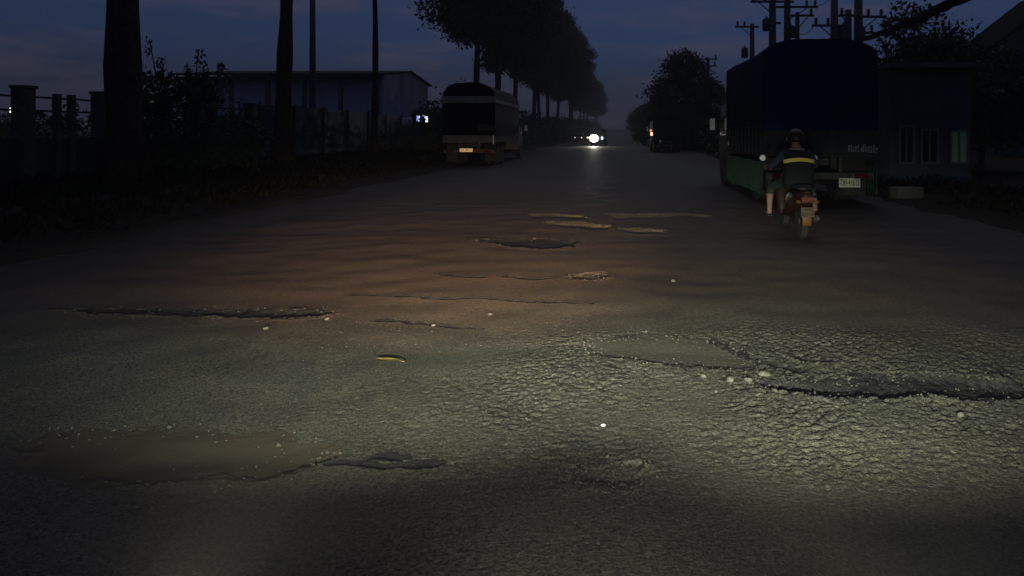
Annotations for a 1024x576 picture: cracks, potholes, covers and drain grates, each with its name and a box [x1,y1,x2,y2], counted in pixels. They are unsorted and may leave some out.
pothole [2,428,343,490]
pothole [755,371,1024,404]
pothole [604,212,712,221]
crack [349,274,597,330]
pothole [564,333,762,372]
pothole [569,272,609,280]
pothole [479,238,583,249]
pothole [541,221,613,231]
